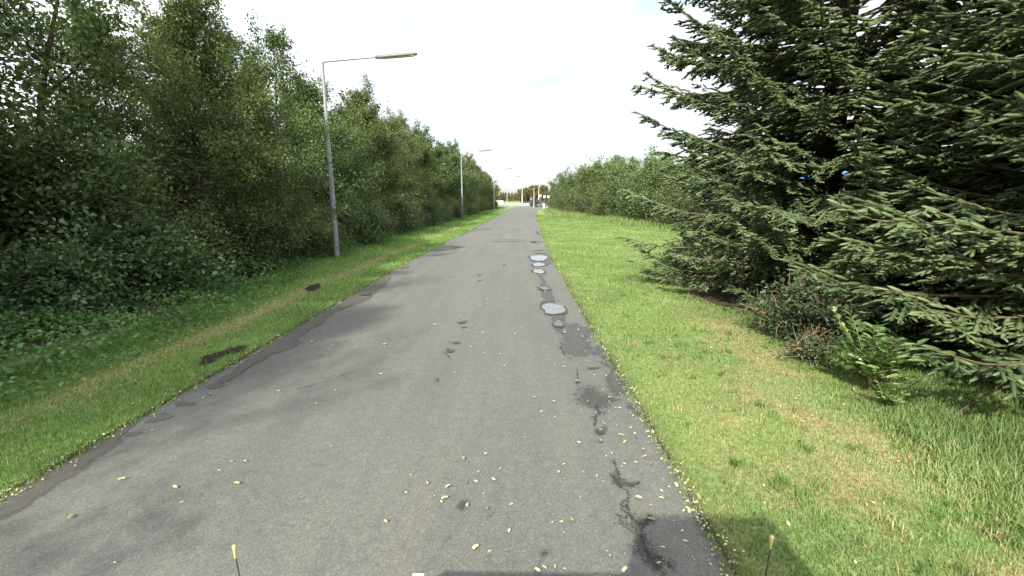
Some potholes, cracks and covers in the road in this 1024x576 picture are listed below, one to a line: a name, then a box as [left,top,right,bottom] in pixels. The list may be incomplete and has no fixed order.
pothole [540,301,568,315]
crack [612,460,671,575]
pothole [528,254,550,262]
